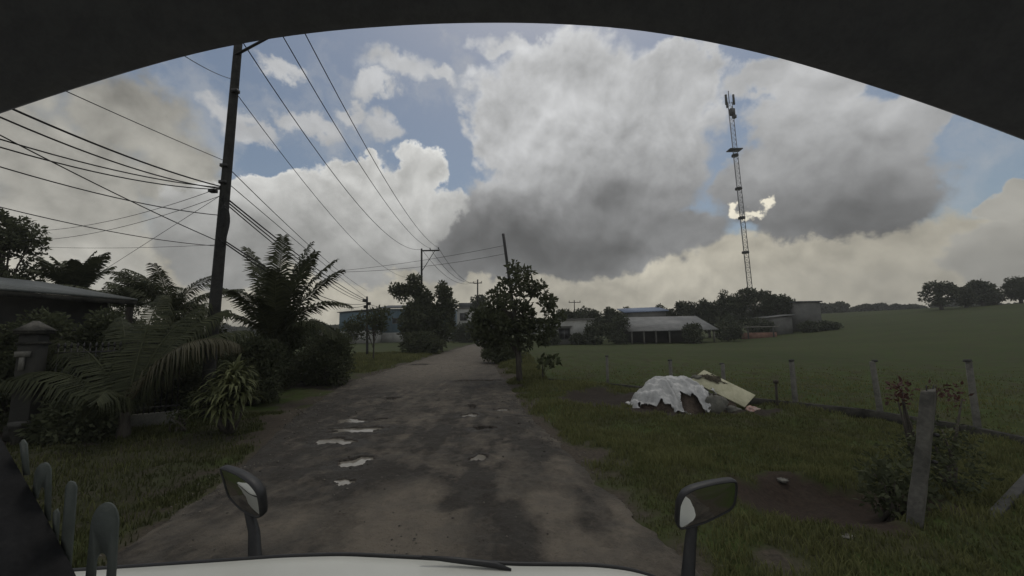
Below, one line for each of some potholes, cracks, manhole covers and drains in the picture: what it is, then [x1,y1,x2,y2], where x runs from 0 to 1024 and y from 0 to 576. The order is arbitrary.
pothole [336,455,376,468]
pothole [324,425,390,433]
pothole [314,436,359,445]
pothole [467,453,489,461]
pothole [333,478,357,486]
